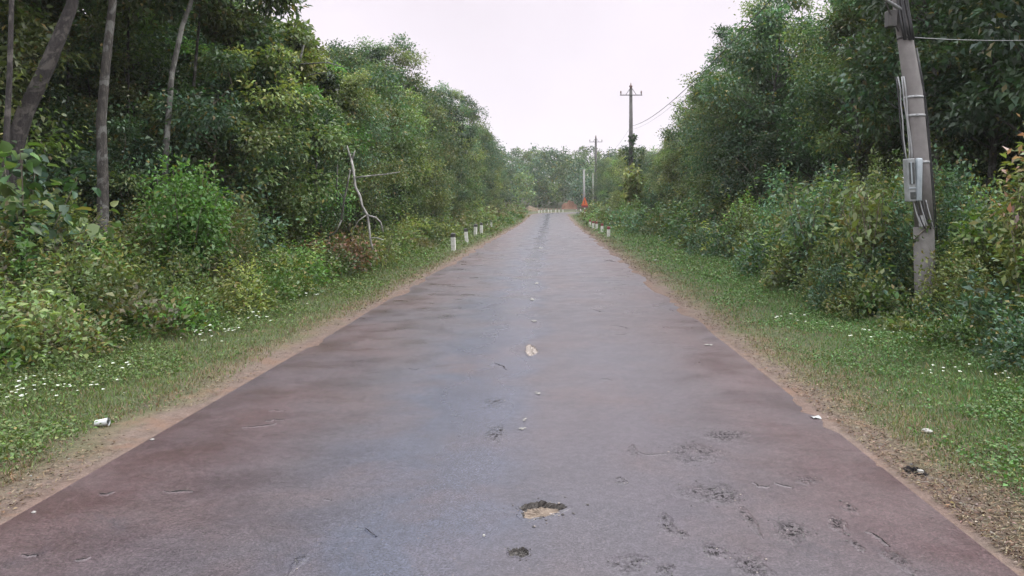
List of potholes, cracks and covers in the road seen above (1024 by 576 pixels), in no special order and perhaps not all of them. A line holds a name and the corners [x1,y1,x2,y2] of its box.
pothole [503,497,589,528]
pothole [506,546,531,561]
crack [865,531,890,547]
crack [356,527,377,537]
